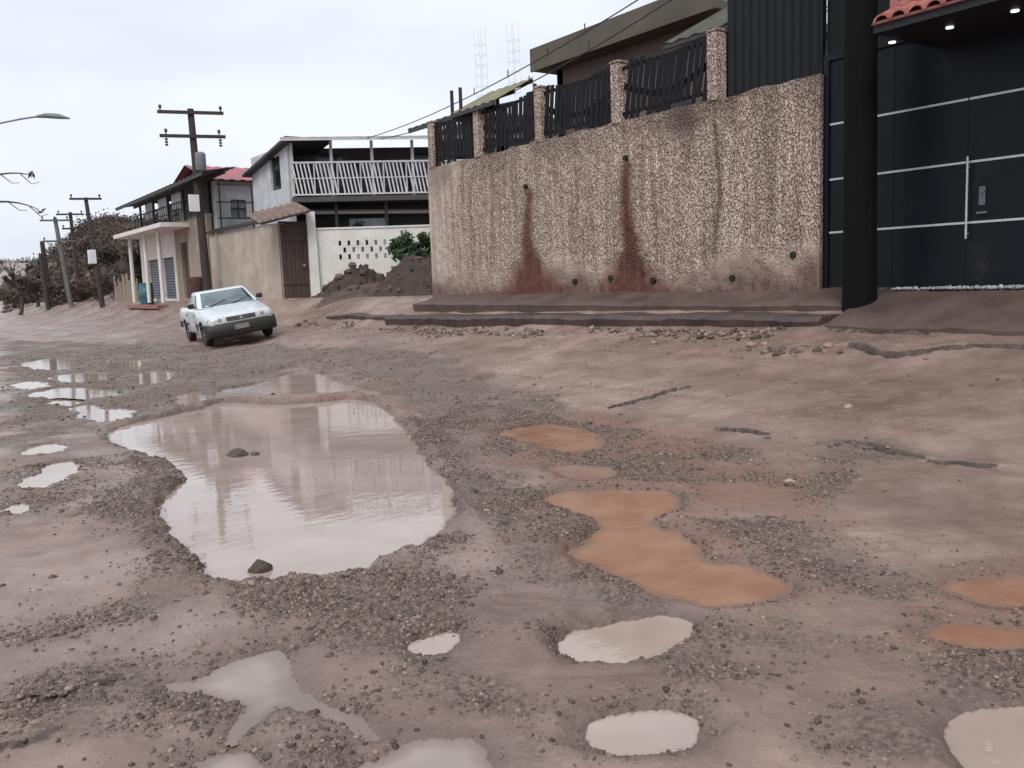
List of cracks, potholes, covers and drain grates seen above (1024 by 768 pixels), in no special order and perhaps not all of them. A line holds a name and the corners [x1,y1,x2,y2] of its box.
pothole [97,393,472,582]
pothole [895,607,1024,656]
crack [714,427,771,436]
crack [826,440,998,469]
pothole [211,371,392,397]
pothole [57,402,107,413]
pothole [916,563,1024,611]
pothole [0,378,58,390]
pothole [487,420,618,453]
pothole [165,390,212,406]
pothole [39,370,131,383]
pothole [7,457,103,489]
